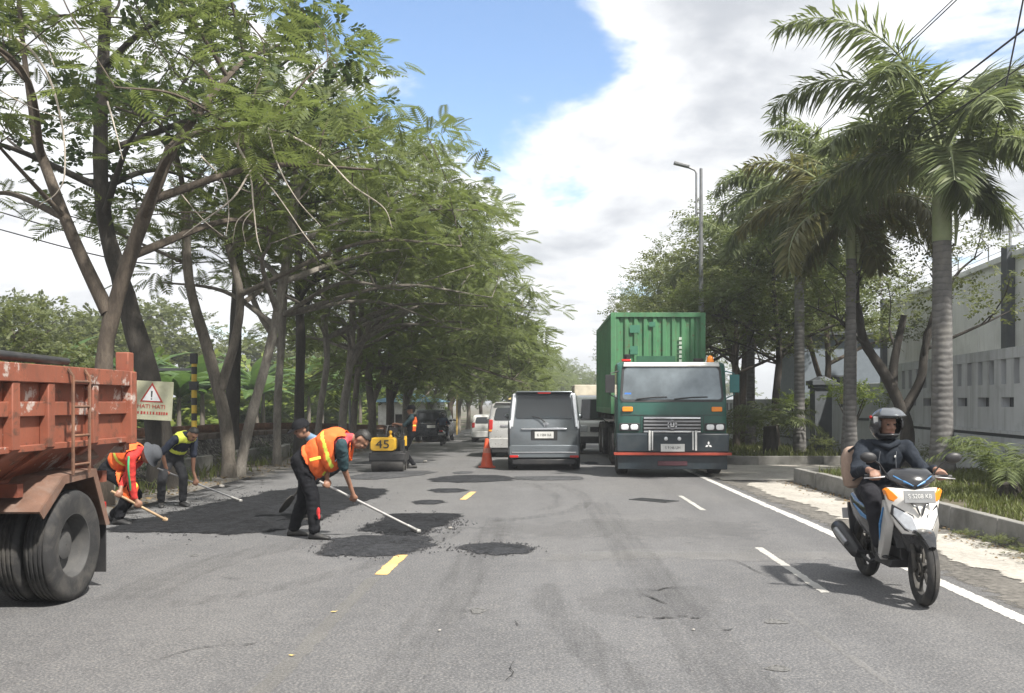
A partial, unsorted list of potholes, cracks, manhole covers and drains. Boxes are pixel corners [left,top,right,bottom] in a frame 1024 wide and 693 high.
crack [639,587,701,618]
